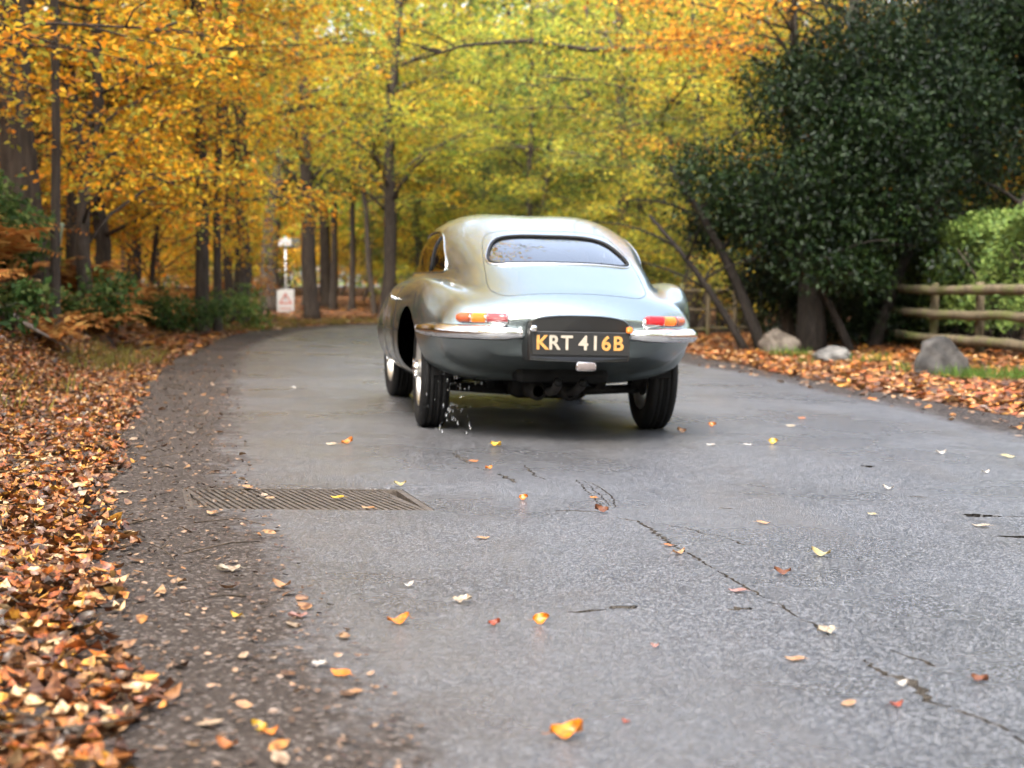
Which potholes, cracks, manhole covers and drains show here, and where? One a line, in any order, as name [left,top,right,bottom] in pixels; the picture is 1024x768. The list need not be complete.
crack [863,650,1024,744]
drain grate [182,487,435,511]
crack [451,453,546,483]
crack [557,480,830,636]
